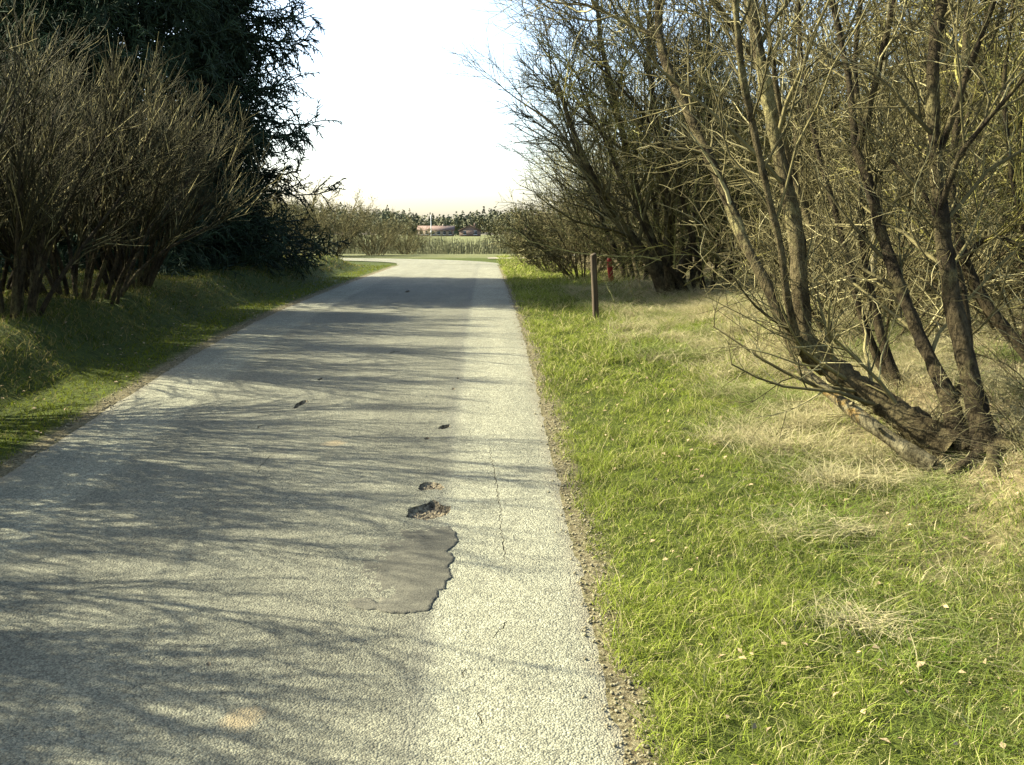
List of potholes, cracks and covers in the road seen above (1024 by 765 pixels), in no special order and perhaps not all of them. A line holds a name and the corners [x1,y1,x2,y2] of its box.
crack [489,445,511,588]
pothole [418,482,445,491]
pothole [406,499,451,520]
